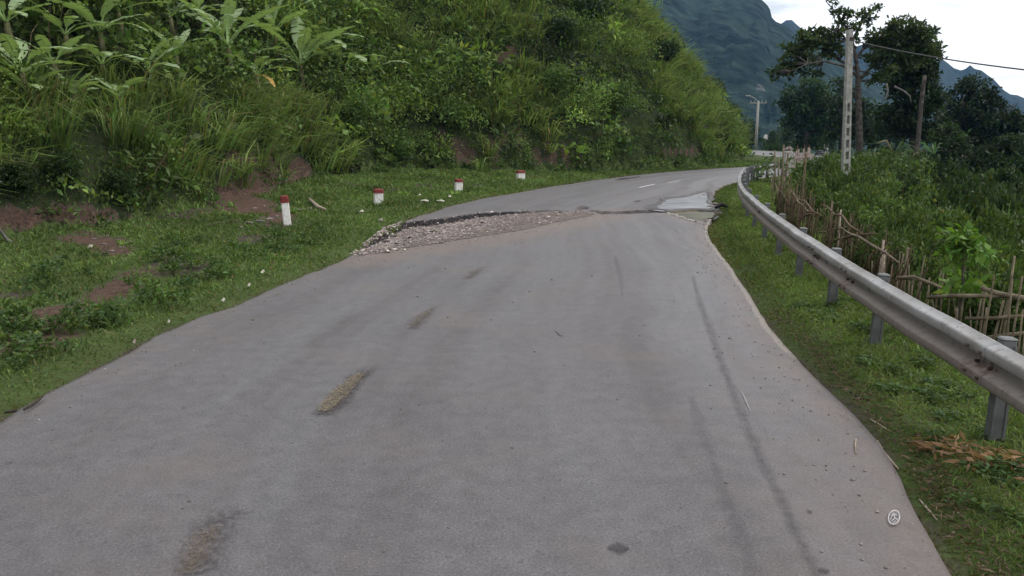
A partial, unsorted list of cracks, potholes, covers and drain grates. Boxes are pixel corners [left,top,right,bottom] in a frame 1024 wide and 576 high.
pothole [317,371,370,414]
pothole [360,211,596,253]
pothole [671,209,719,221]
pothole [643,189,719,213]
